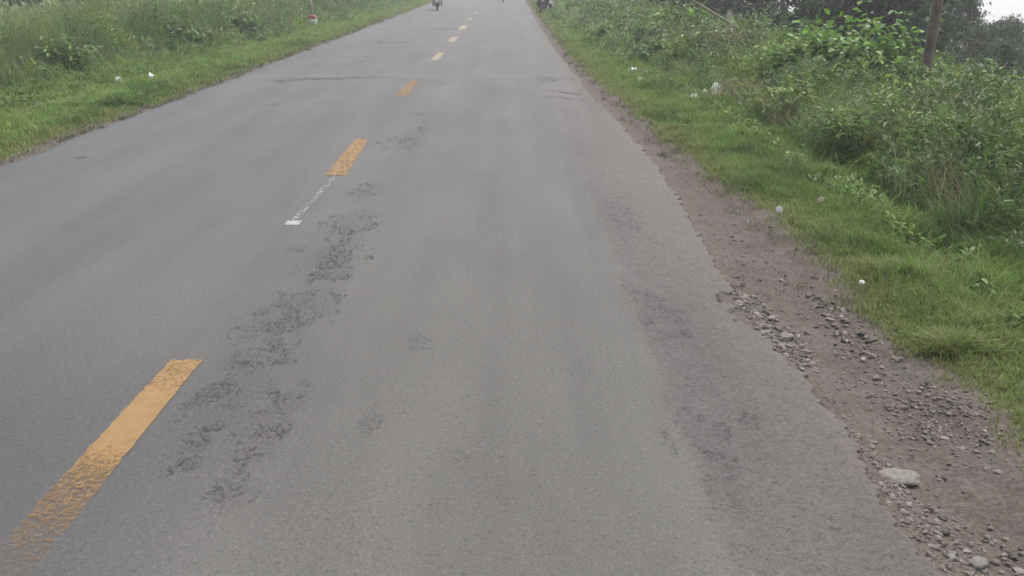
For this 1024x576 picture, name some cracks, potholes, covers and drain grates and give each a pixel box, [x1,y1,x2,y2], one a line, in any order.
crack [536,76,586,101]
